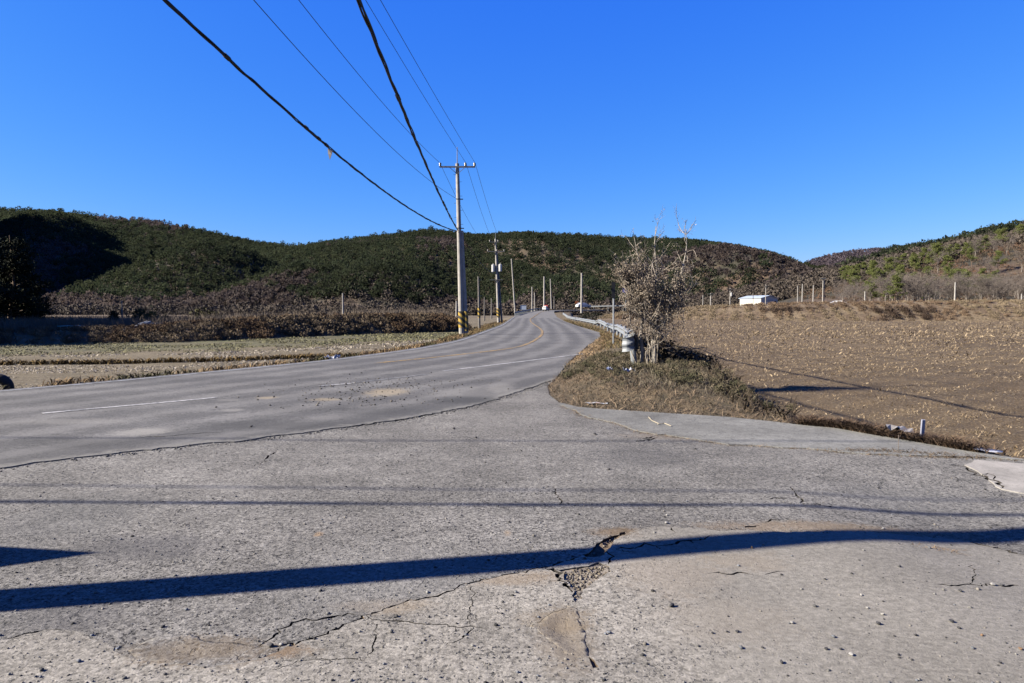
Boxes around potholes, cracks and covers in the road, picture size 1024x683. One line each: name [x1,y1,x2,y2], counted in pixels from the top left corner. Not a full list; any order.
crack [260,557,577,671]
crack [607,528,710,565]
crack [770,487,831,507]
pothole [559,562,611,602]
crack [939,565,1019,587]
